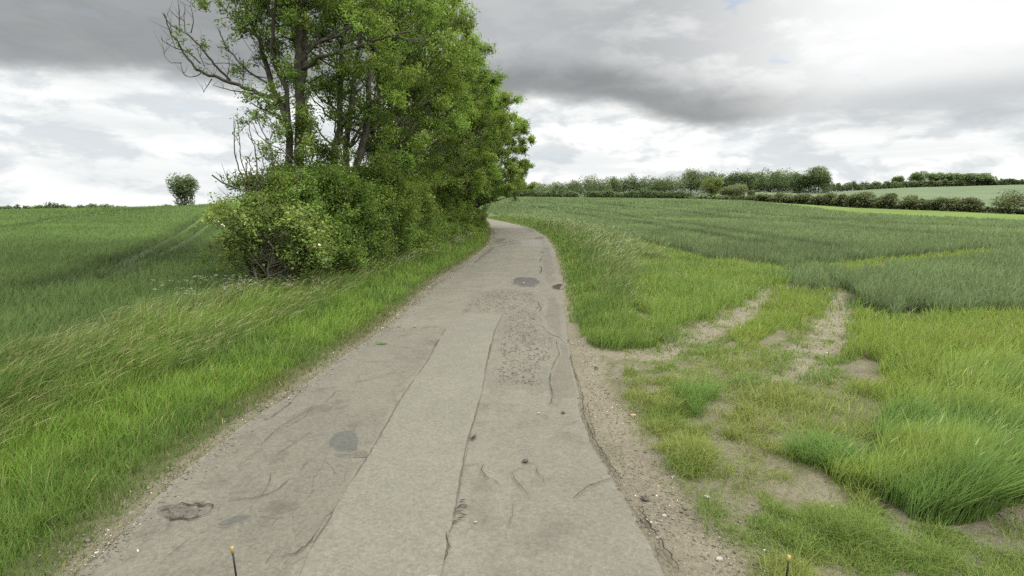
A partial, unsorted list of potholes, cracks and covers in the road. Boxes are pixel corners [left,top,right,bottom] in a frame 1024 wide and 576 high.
crack [642,508,679,570]
crack [549,340,621,502]
crack [166,390,337,556]
crack [444,499,467,560]
crack [481,464,544,526]
pothole [158,503,211,520]
